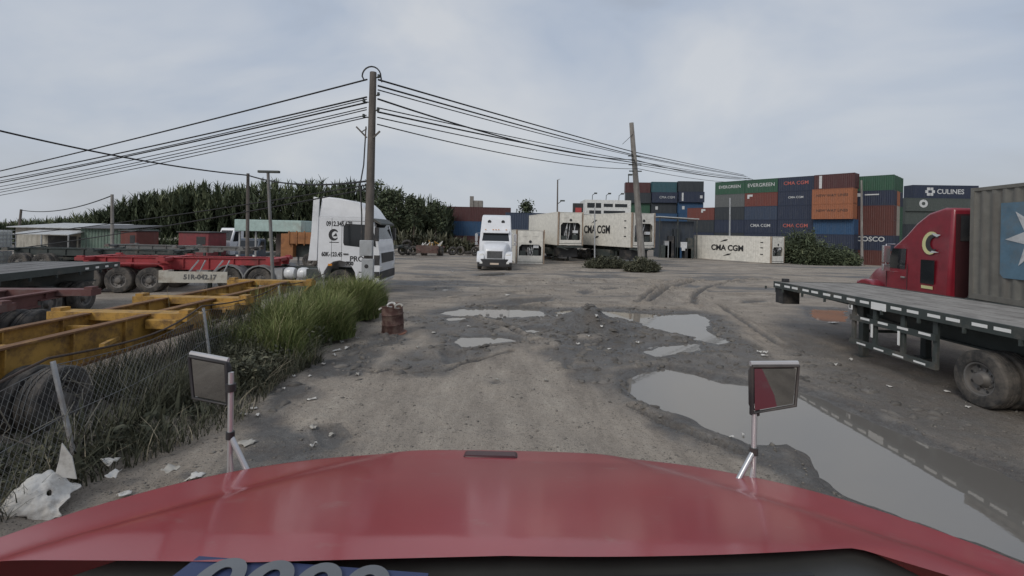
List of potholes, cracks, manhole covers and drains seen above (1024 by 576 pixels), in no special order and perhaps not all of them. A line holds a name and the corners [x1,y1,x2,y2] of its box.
pothole [637,312,732,346]
pothole [432,305,552,318]
pothole [640,342,706,358]
pothole [450,335,518,348]
pothole [620,366,1024,564]
